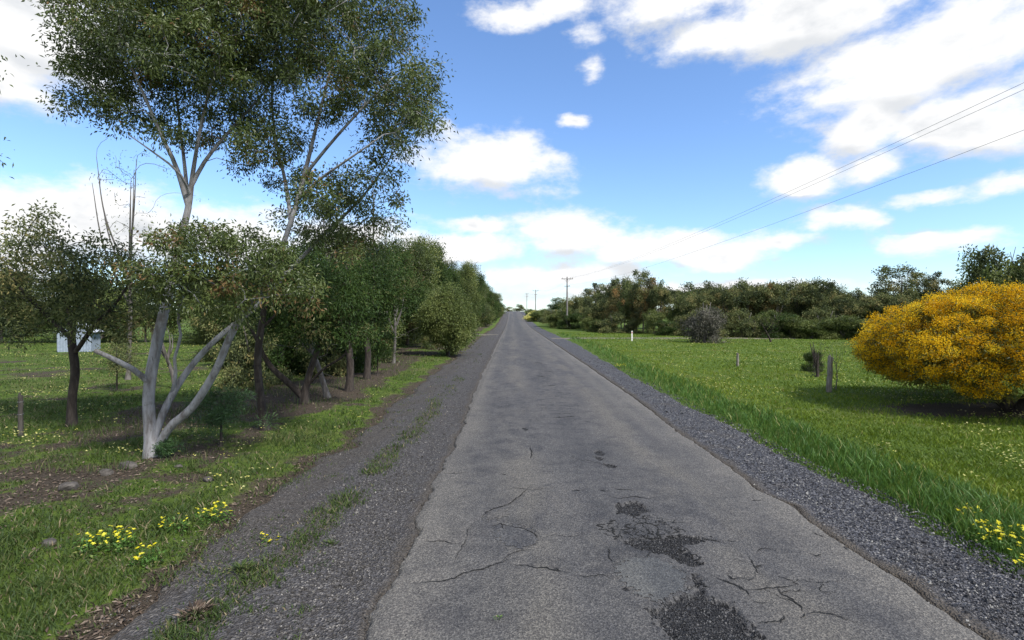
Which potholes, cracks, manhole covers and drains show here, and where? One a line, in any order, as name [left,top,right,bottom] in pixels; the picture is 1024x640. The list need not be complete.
pothole [644,573,767,640]
pothole [615,500,649,516]
pothole [615,533,712,567]
crack [414,486,854,623]
